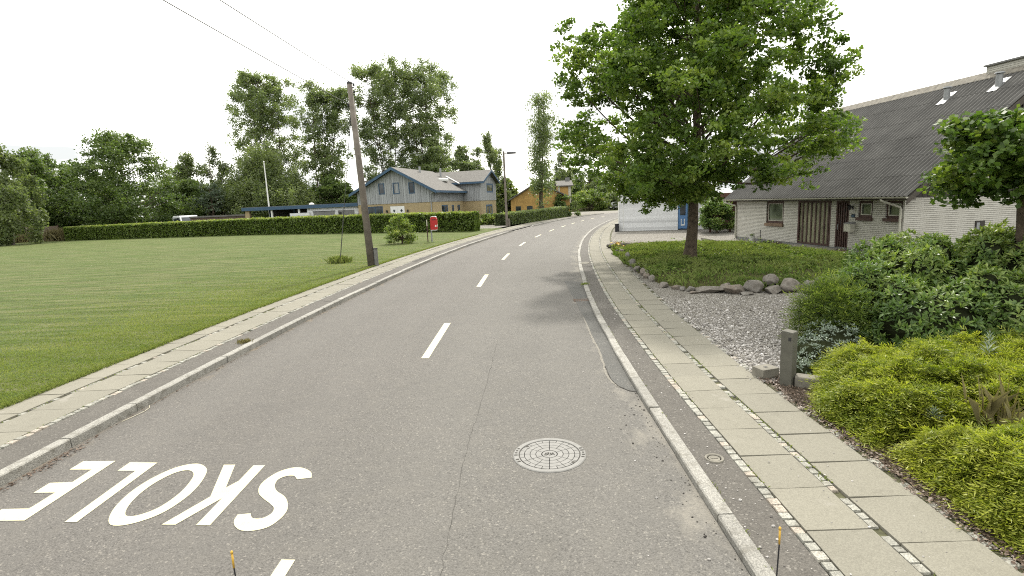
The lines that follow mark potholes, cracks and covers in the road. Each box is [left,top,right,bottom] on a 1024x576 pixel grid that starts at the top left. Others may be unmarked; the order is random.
manhole cover [513,438,586,473]
crack [440,351,495,575]
utility cover [704,453,724,463]
